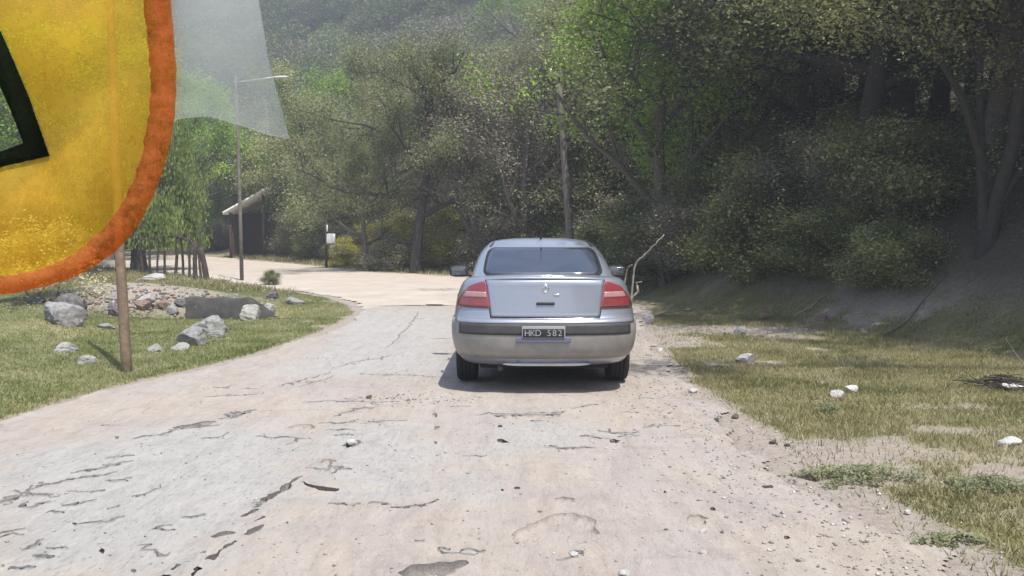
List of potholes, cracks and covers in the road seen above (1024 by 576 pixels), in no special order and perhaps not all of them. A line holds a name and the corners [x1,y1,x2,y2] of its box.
pothole [398,560,469,576]
crack [137,513,206,558]
crack [450,404,599,422]
pothole [686,515,708,525]
pothole [511,513,600,550]
crack [415,539,487,556]
crack [547,397,681,450]
crack [0,527,68,571]
crack [0,305,451,526]
